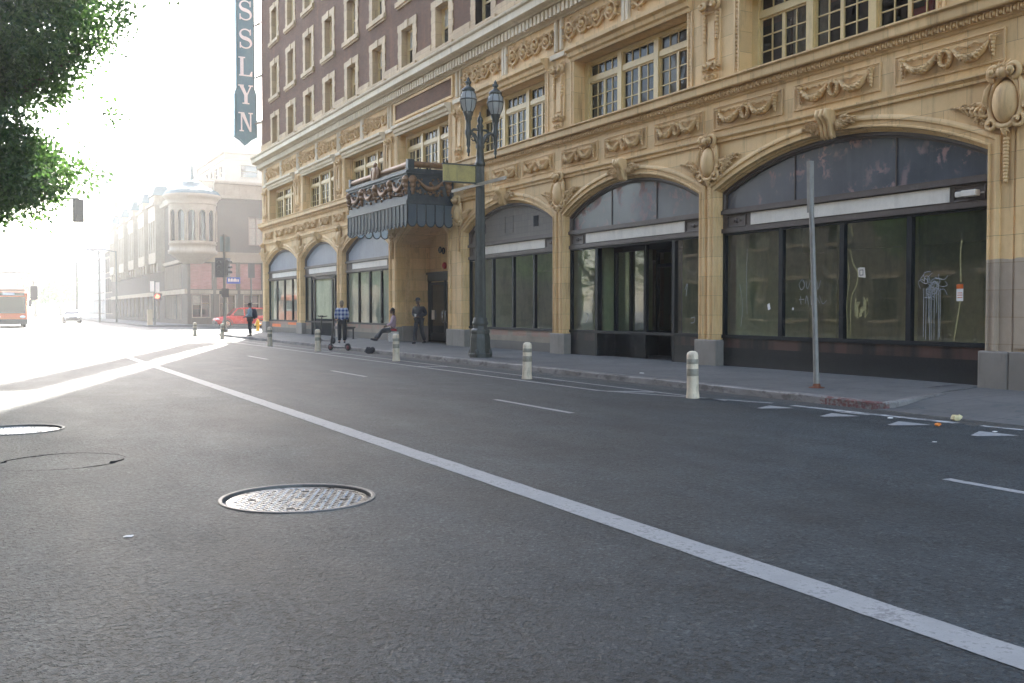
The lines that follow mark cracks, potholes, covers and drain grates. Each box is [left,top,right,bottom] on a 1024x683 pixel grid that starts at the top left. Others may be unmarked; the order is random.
manhole cover [218,483,376,514]
manhole cover [0,424,65,435]
